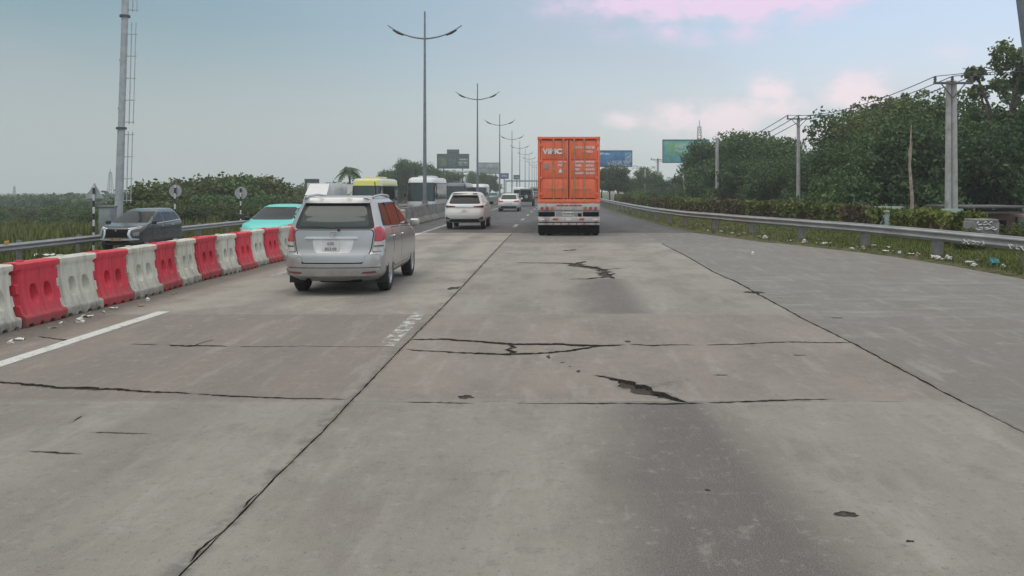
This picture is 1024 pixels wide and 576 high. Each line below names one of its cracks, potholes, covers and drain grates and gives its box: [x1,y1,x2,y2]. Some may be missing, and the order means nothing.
crack [0,233,1024,576]
